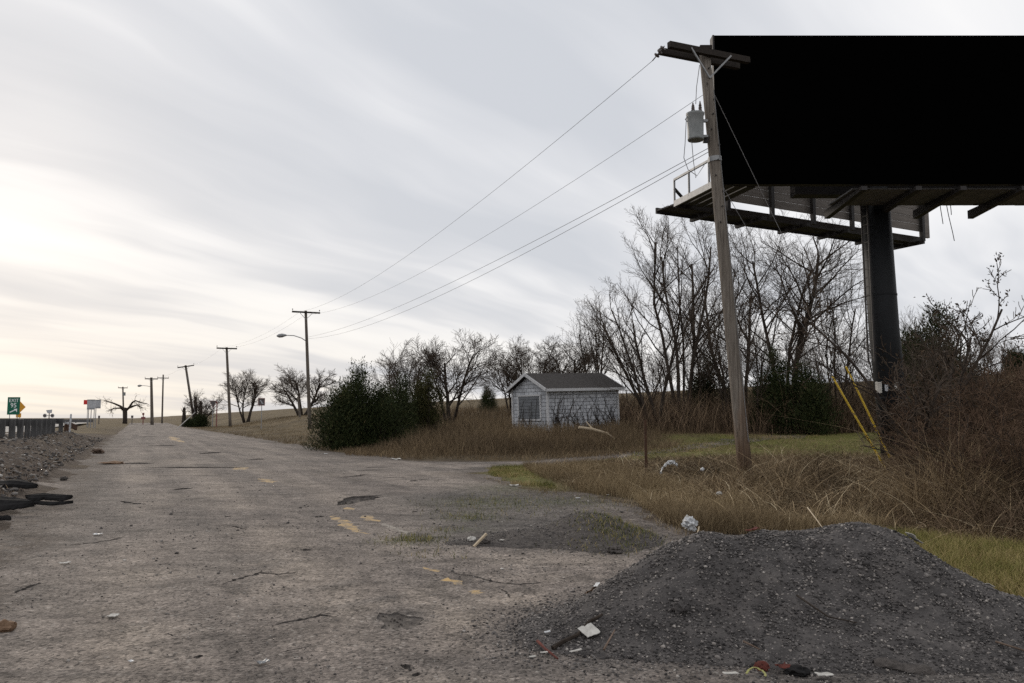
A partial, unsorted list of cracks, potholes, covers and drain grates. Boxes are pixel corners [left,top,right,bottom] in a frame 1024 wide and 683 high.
crack [442,571,550,598]
pothole [337,495,381,506]
crack [12,582,40,594]
crack [222,571,302,585]
pothole [377,612,424,630]
crack [269,614,337,626]
